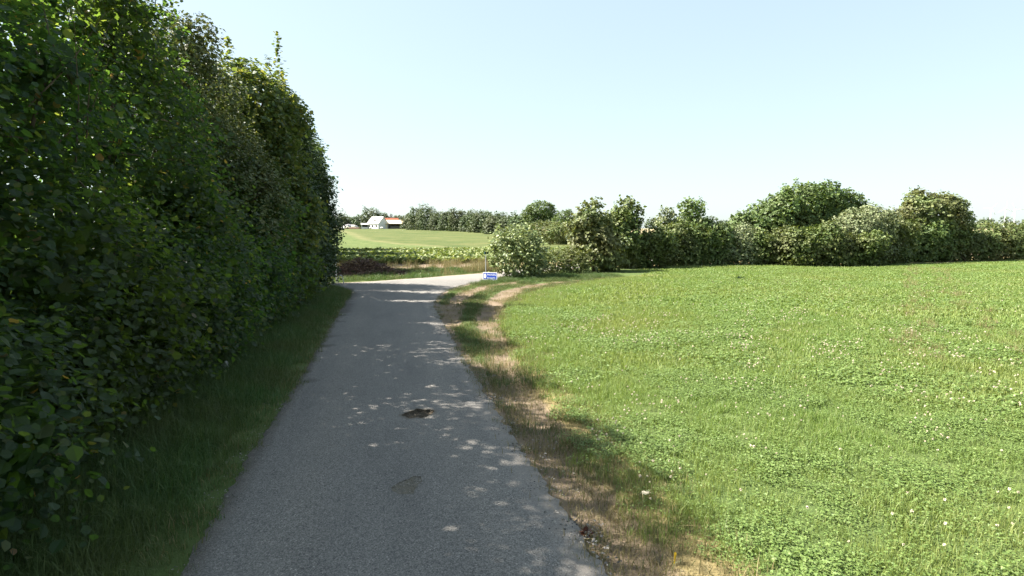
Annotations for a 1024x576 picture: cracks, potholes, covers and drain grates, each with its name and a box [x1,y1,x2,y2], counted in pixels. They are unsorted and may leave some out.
pothole [402,409,434,418]
